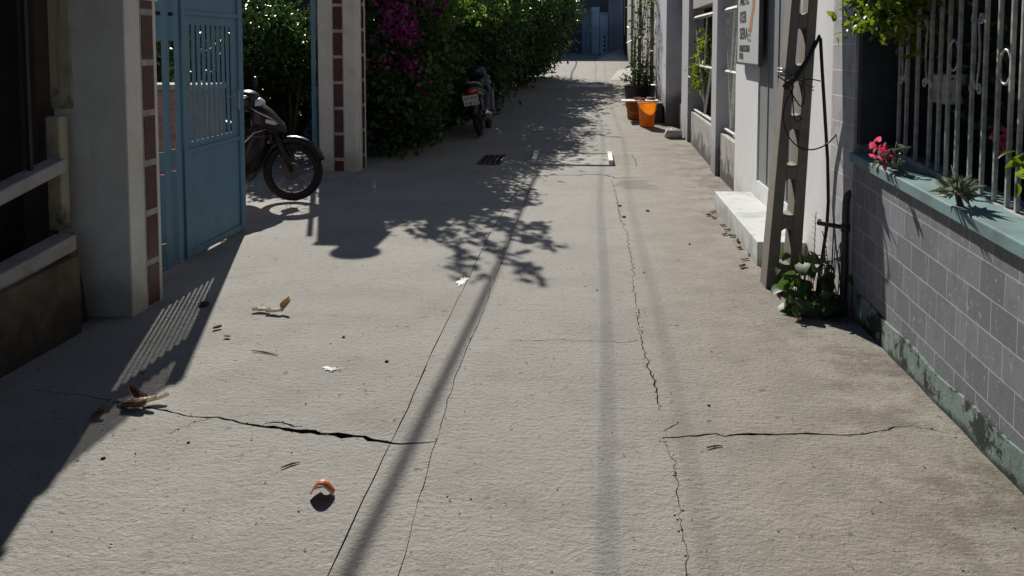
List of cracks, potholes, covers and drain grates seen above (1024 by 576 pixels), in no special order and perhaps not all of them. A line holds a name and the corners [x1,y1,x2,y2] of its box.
drain grate [476,155,506,165]
crack [662,422,957,576]
crack [37,156,662,576]
